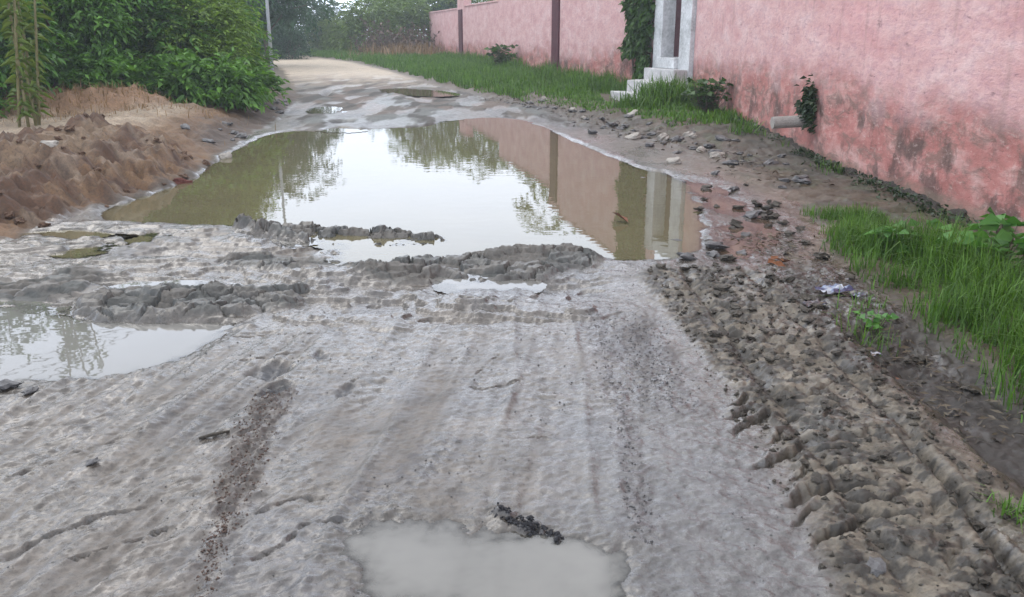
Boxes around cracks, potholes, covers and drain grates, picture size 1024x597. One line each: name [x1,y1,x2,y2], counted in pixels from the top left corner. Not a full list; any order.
pothole [326,503,649,597]
pothole [93,118,708,265]
pothole [0,300,242,382]
pothole [436,277,547,294]
